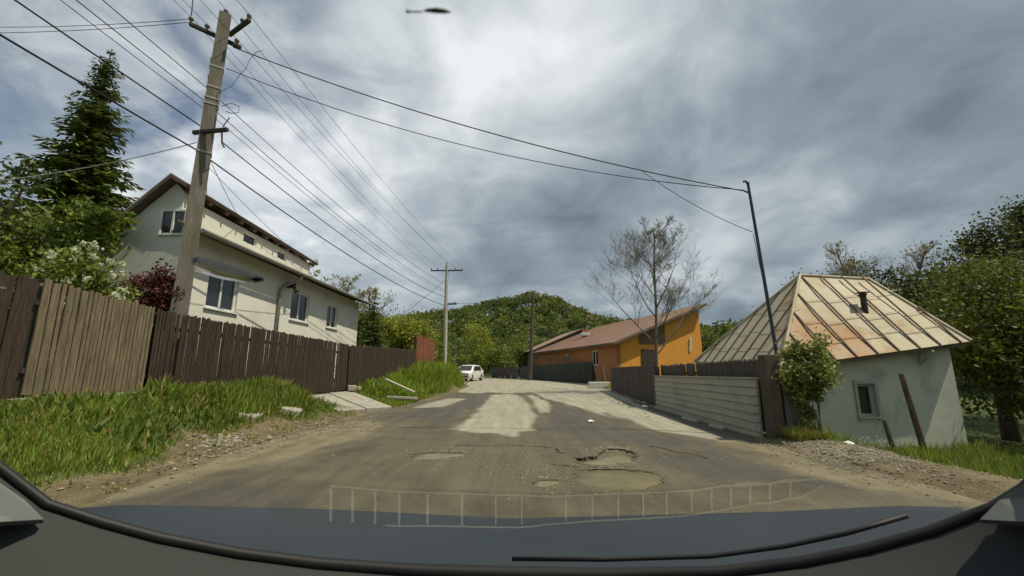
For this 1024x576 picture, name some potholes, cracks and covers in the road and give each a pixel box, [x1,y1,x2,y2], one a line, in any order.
crack [454,444,600,470]
crack [649,446,708,459]
pothole [403,451,472,462]
pothole [562,467,672,494]
pothole [558,447,644,467]
